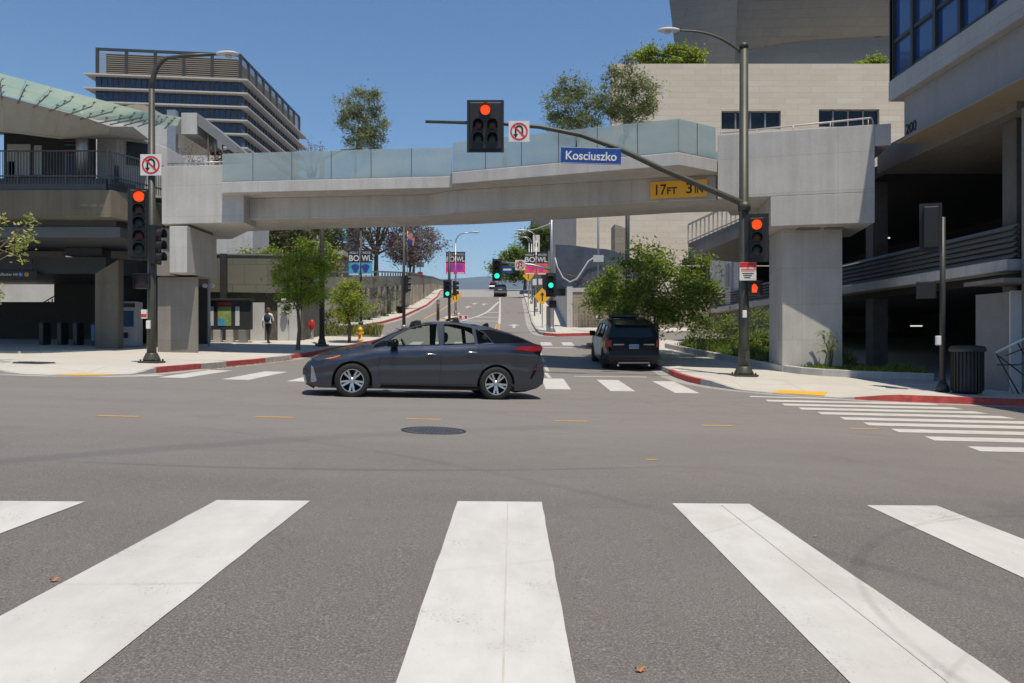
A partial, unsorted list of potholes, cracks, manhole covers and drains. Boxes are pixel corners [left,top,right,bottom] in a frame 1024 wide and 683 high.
manhole cover [401,426,466,435]
